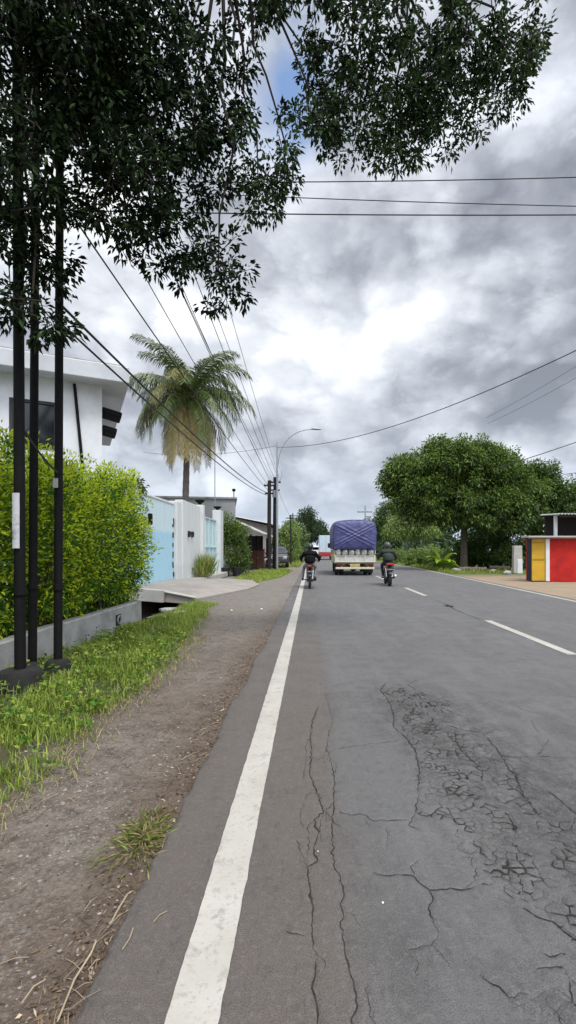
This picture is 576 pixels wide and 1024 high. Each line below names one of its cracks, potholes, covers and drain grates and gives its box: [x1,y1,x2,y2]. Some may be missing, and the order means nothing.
crack [285,695,407,1024]
crack [376,684,576,1024]
